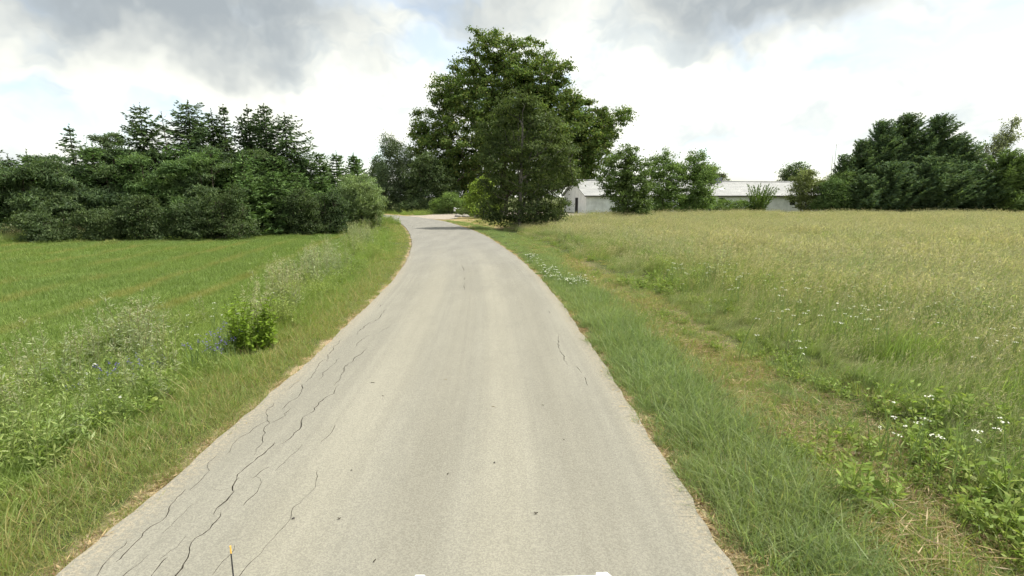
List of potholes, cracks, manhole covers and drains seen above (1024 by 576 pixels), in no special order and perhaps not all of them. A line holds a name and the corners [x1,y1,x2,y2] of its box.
crack [97,305,388,576]
